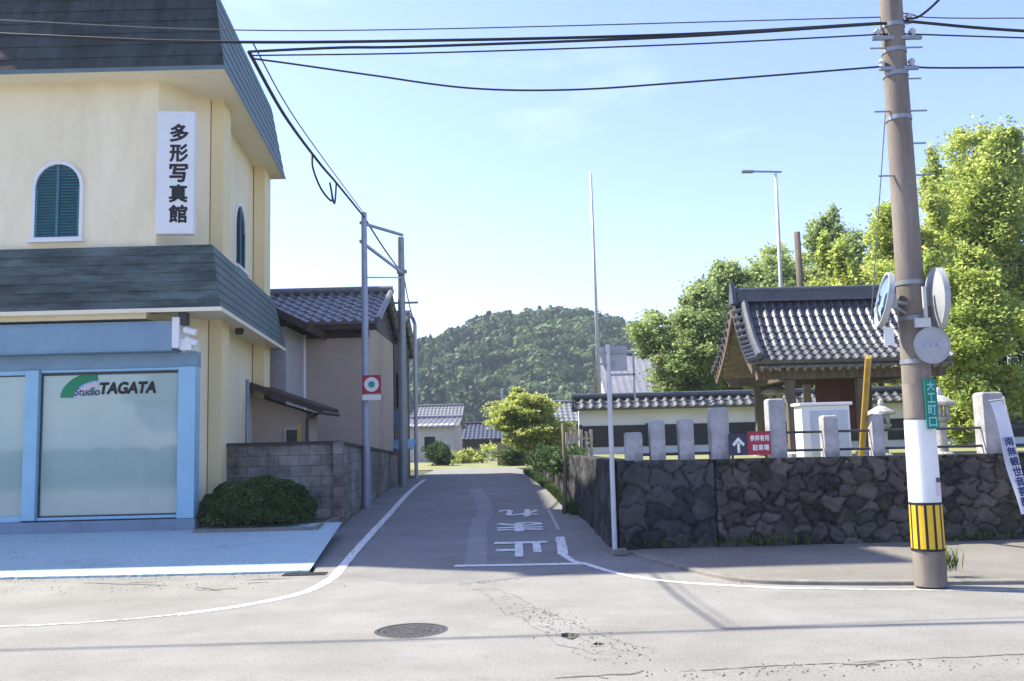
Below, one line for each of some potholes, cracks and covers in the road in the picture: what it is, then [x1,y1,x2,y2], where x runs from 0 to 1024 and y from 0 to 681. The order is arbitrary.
crack [473,588,655,679]
crack [679,654,1020,672]
manhole cover [374,623,448,638]
